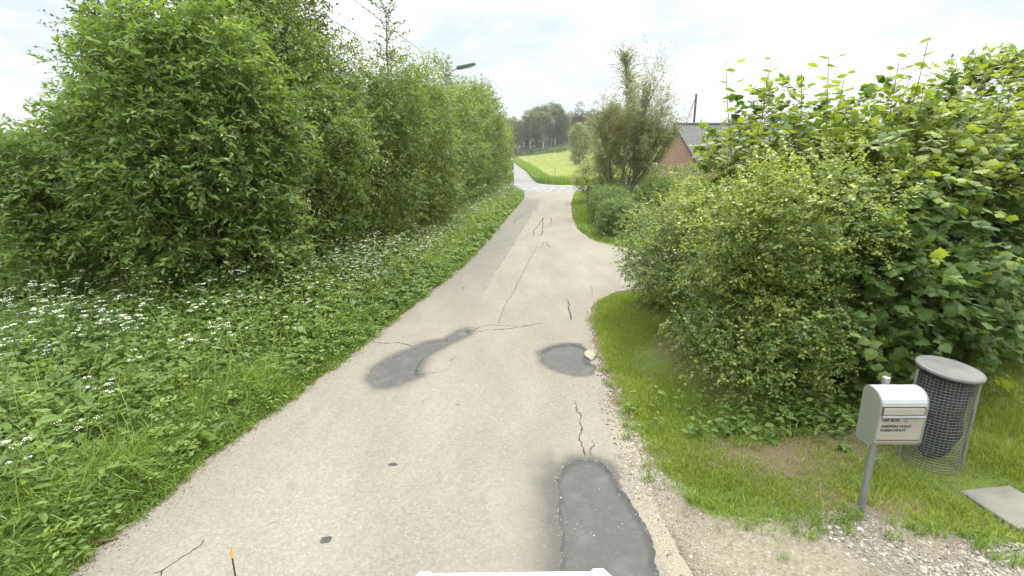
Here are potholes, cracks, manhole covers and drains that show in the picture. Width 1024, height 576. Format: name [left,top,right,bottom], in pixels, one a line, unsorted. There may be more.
crack [154,540,204,576]
crack [574,402,595,456]
crack [463,211,552,332]
